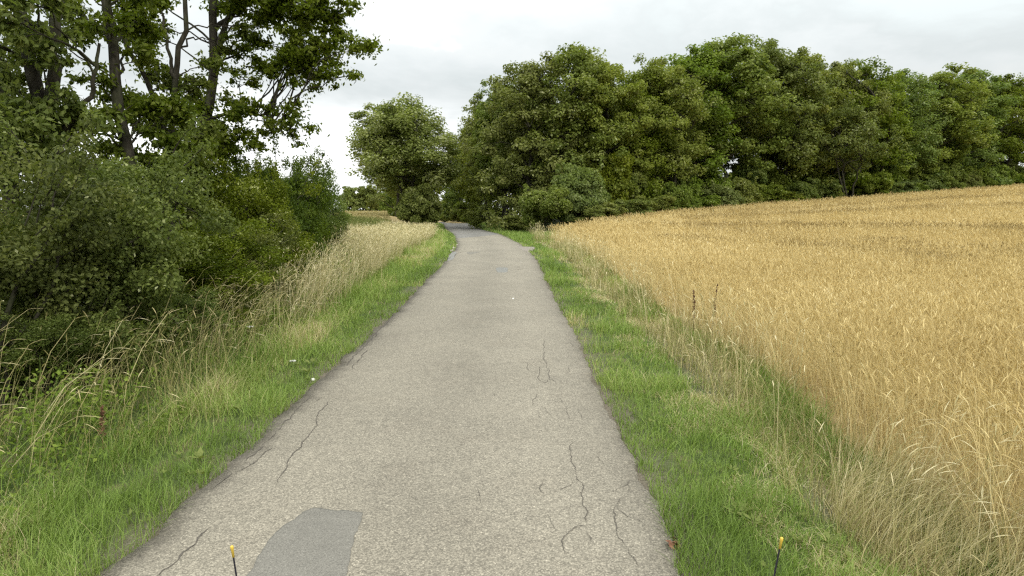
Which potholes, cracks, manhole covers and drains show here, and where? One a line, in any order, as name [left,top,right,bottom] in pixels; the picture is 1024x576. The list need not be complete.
crack [214,397,328,487]
crack [158,528,209,575]
crack [539,443,646,566]
crack [527,343,582,417]
